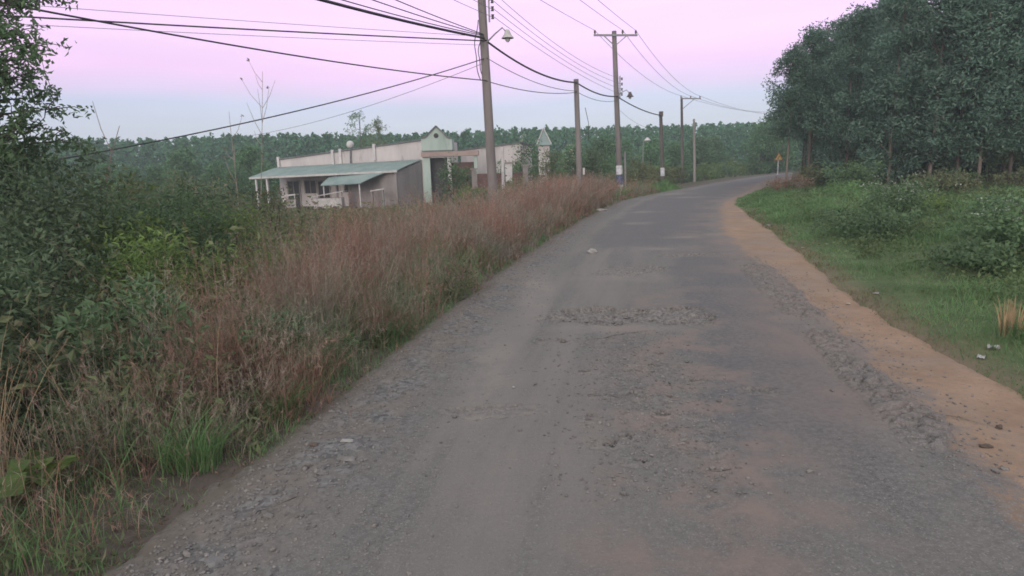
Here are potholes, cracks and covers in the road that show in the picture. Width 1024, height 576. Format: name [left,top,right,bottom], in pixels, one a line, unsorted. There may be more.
pothole [646,409,680,420]
pothole [575,413,600,425]
pothole [614,430,643,443]
pothole [727,385,788,396]
pothole [614,454,656,468]
pothole [589,438,632,452]
pothole [532,305,744,327]
